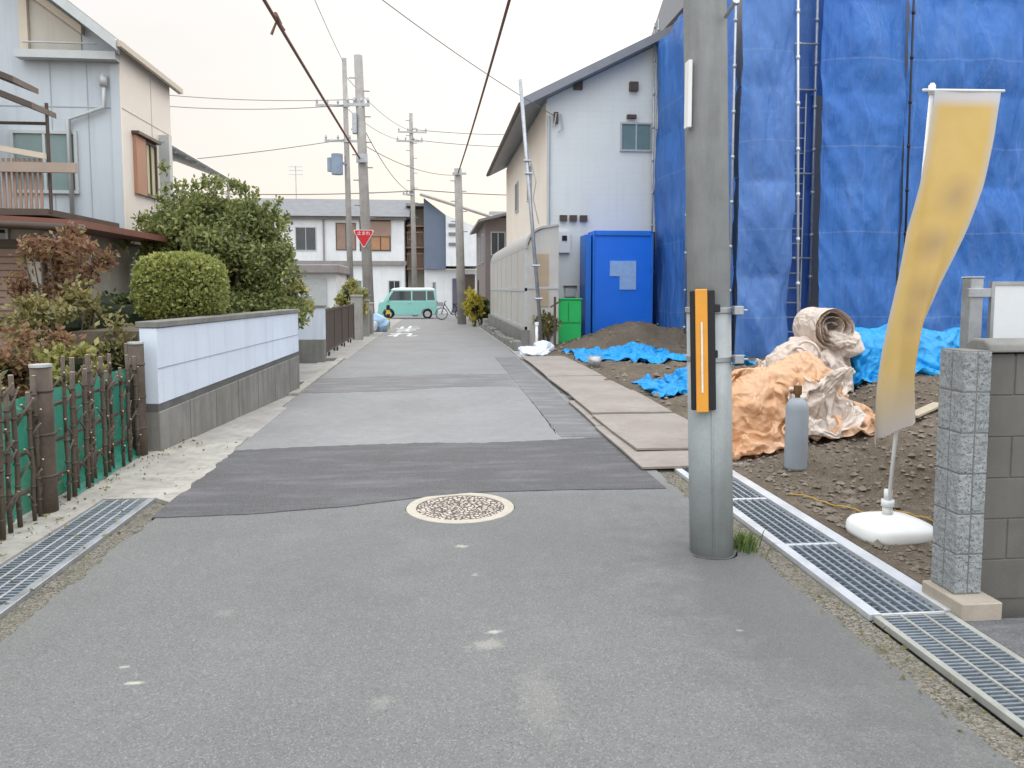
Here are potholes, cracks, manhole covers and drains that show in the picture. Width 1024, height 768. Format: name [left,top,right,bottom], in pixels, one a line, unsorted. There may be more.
drain grate [874,612,1024,736]
drain grate [733,497,849,549]
manhole cover [406,493,514,524]
drain grate [776,541,951,621]
drain grate [0,534,107,607]
